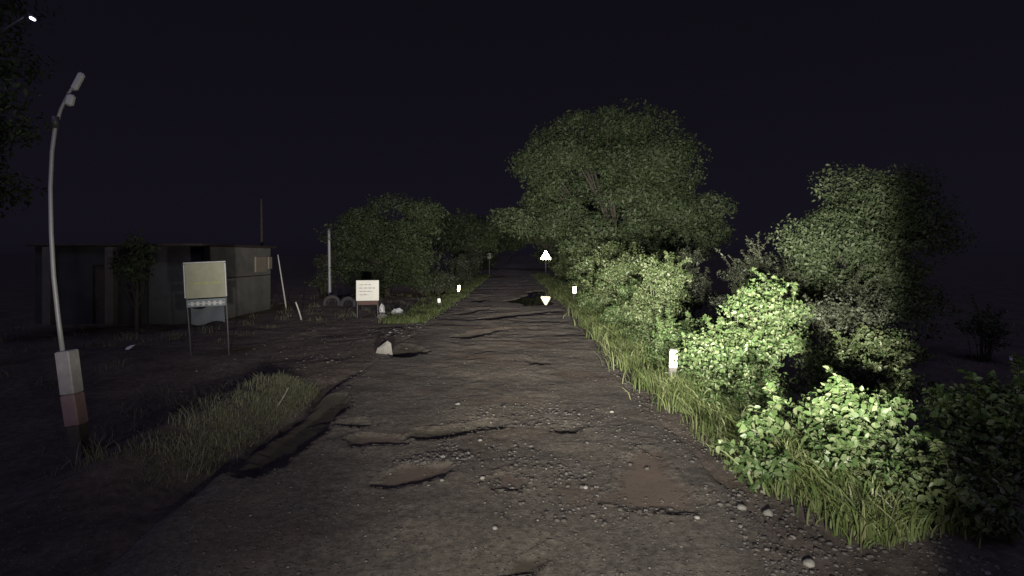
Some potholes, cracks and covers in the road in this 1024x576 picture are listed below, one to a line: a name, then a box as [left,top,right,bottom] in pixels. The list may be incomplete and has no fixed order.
pothole [219,392,354,481]
pothole [592,444,708,516]
pothole [505,290,554,306]
pothole [367,459,458,489]
pothole [482,465,529,491]
pothole [524,356,551,365]
pothole [451,327,514,339]
pothole [398,417,516,442]
pothole [340,430,412,447]
pothole [388,343,431,357]
pothole [548,420,593,434]
